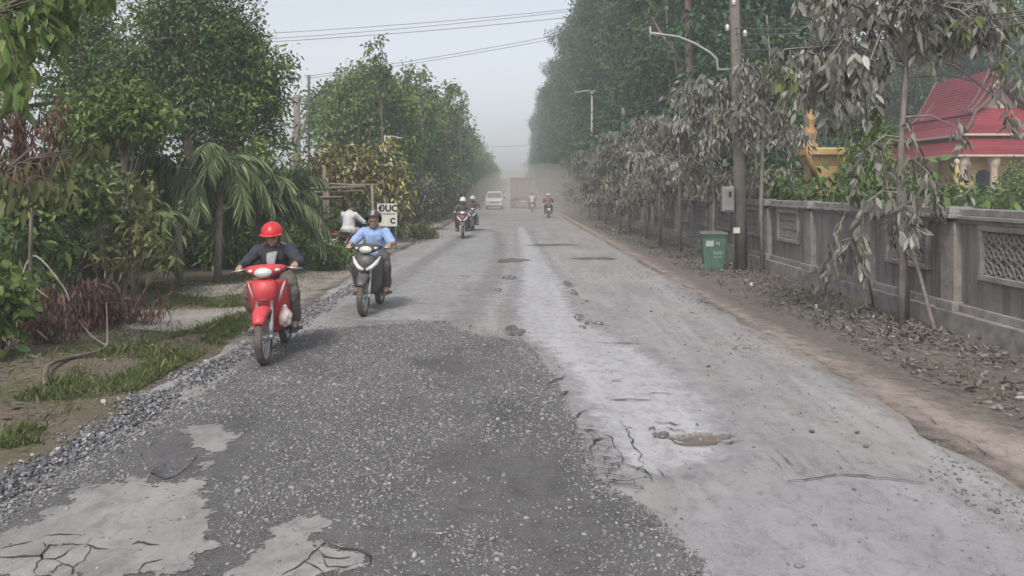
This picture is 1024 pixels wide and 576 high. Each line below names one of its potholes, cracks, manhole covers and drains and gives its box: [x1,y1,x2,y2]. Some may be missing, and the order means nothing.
pothole [505,325,526,336]
pothole [652,431,670,439]
crack [283,539,372,575]
crack [549,374,685,486]
crack [772,452,925,483]
crack [3,533,107,575]
pothole [667,433,731,447]
